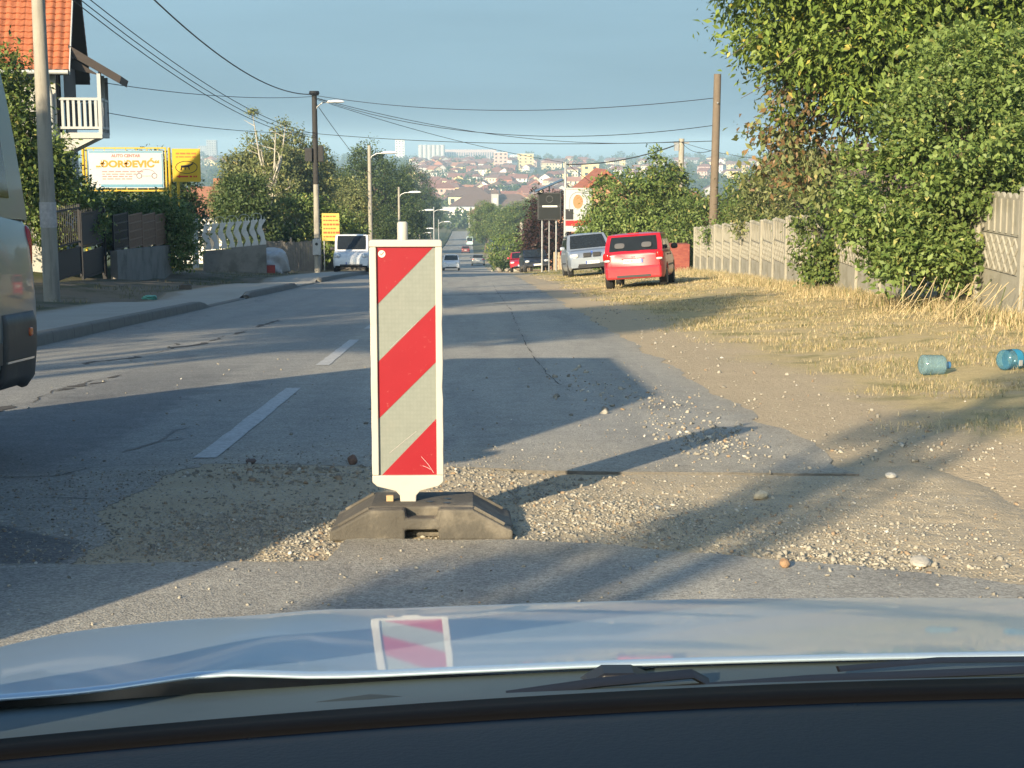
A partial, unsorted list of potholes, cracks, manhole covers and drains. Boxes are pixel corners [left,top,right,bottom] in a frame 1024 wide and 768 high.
crack [24,426,196,477]
crack [471,284,568,390]
crack [0,319,278,412]
